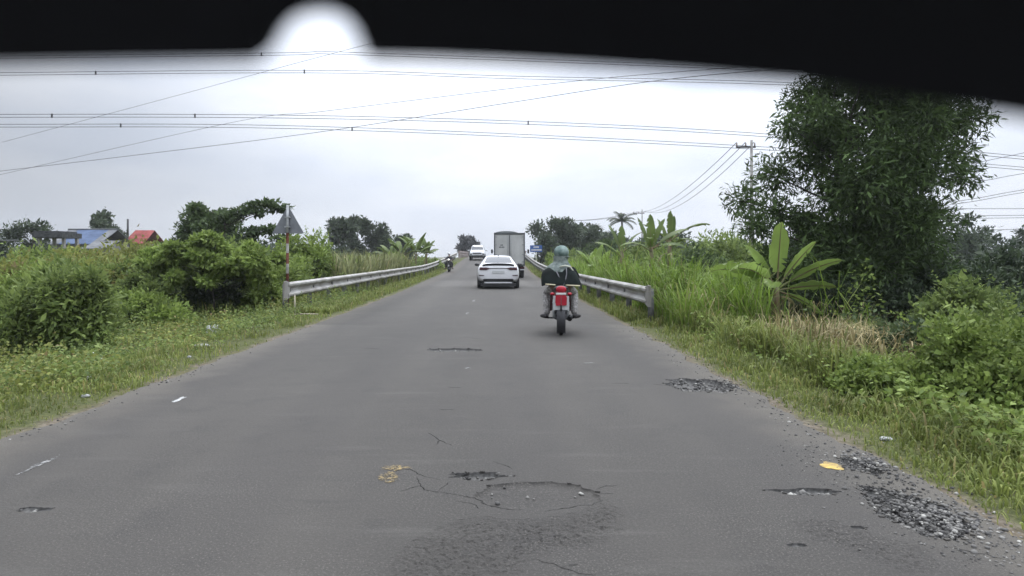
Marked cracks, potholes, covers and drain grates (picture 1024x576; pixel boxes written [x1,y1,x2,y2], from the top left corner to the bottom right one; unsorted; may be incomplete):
crack [387,466,626,576]
pothole [836,456,886,476]
pothole [856,483,980,543]
pothole [762,488,842,496]
pothole [474,481,601,511]
pothole [447,470,515,481]
pothole [662,378,734,393]
